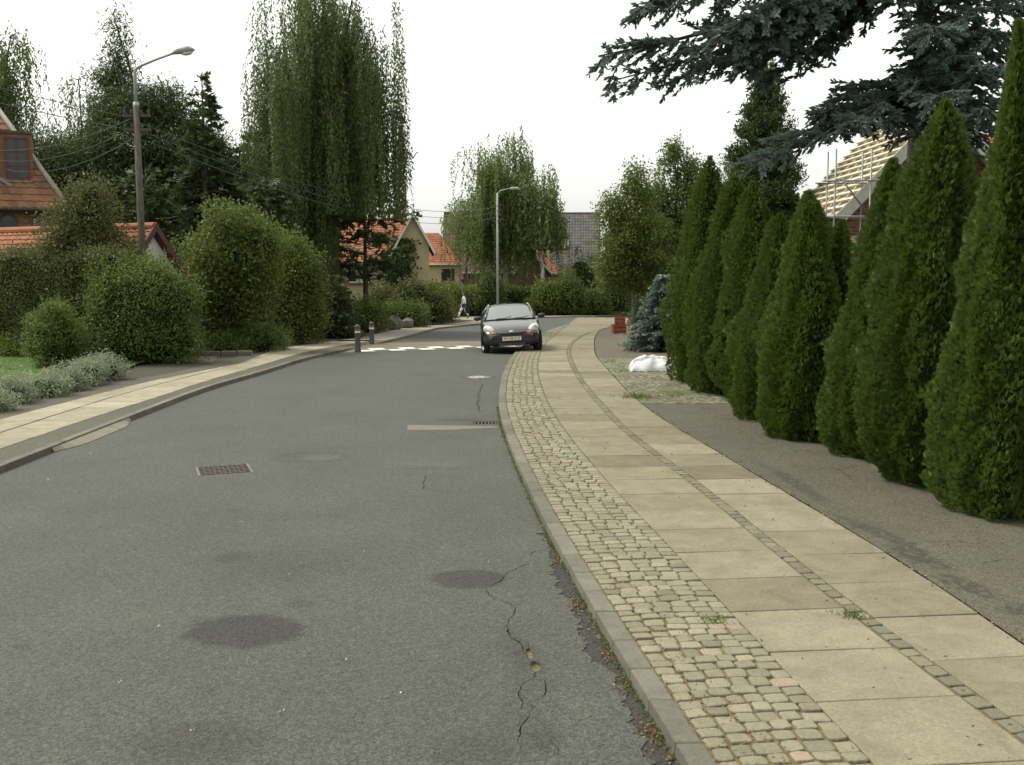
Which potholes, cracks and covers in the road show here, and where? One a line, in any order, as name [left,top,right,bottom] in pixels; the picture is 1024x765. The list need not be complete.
crack [486,550,564,764]
